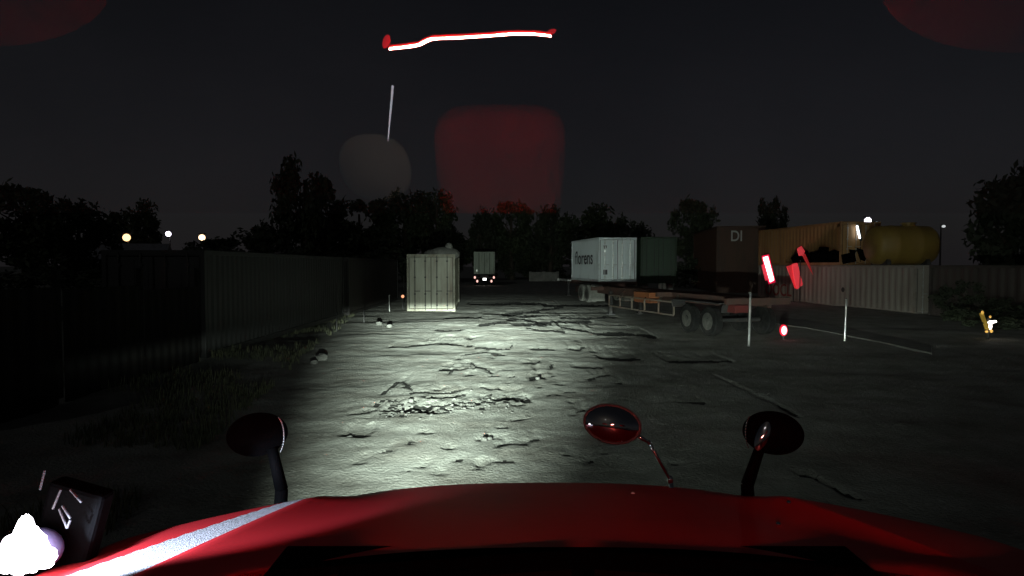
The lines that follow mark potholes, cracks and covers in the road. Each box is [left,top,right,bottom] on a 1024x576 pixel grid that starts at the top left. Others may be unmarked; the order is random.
crack [355,345,641,415]
